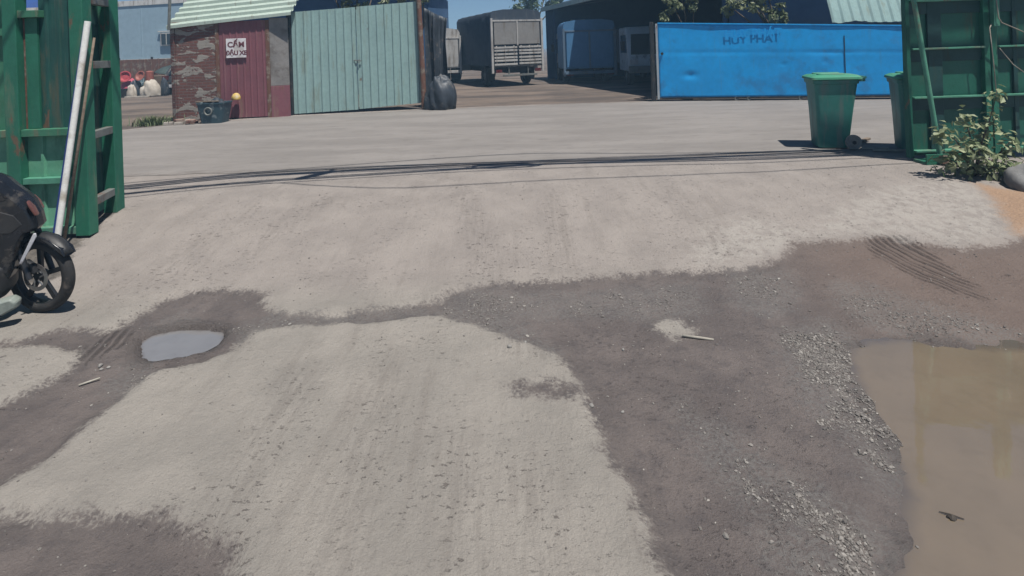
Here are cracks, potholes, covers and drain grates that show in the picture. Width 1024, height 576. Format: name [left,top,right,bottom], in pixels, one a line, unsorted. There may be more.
pothole [125,320,237,370]
